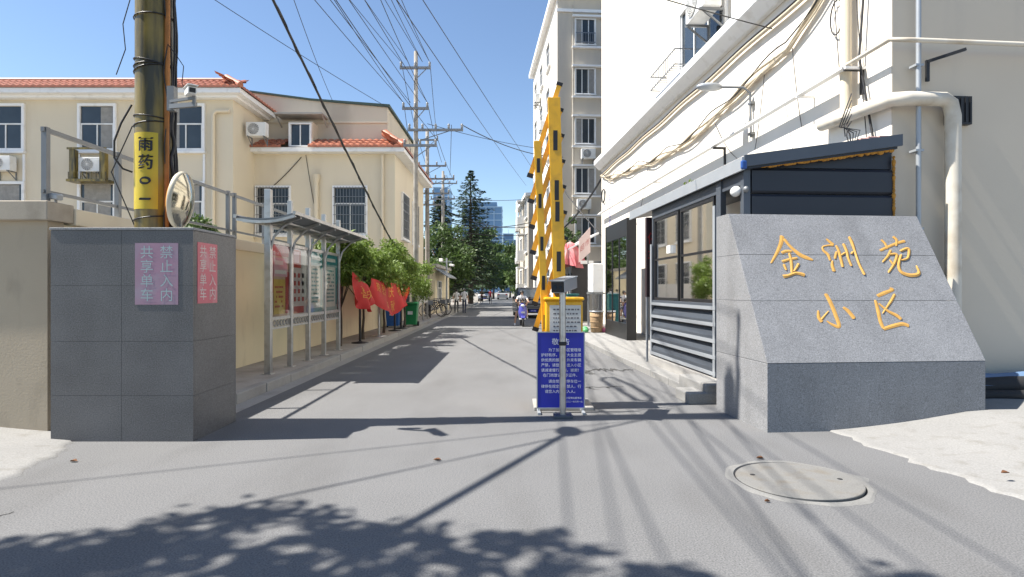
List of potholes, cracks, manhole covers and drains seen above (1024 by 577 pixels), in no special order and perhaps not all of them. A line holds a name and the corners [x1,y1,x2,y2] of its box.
manhole cover [725,460,877,507]
